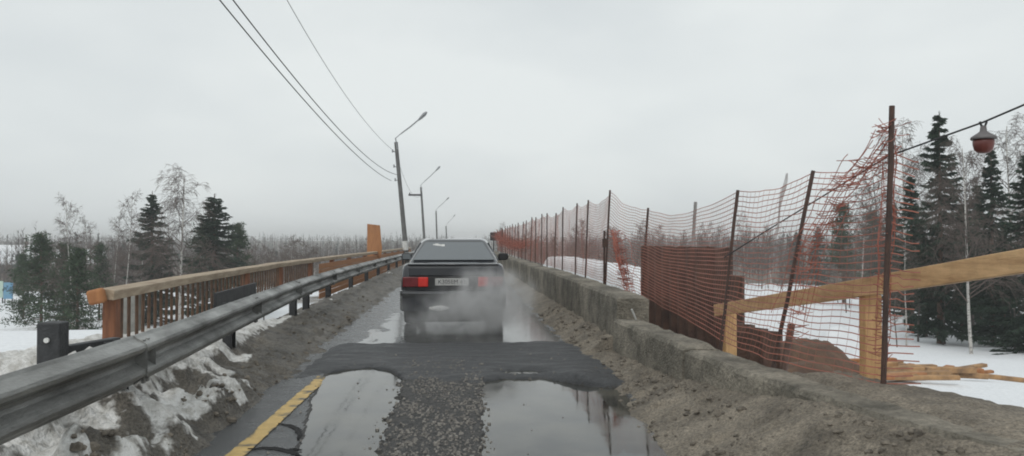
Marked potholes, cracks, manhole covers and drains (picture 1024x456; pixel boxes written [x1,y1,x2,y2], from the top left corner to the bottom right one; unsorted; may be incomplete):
pothole [294,367,408,456]
pothole [474,370,667,456]
crack [248,423,303,456]
